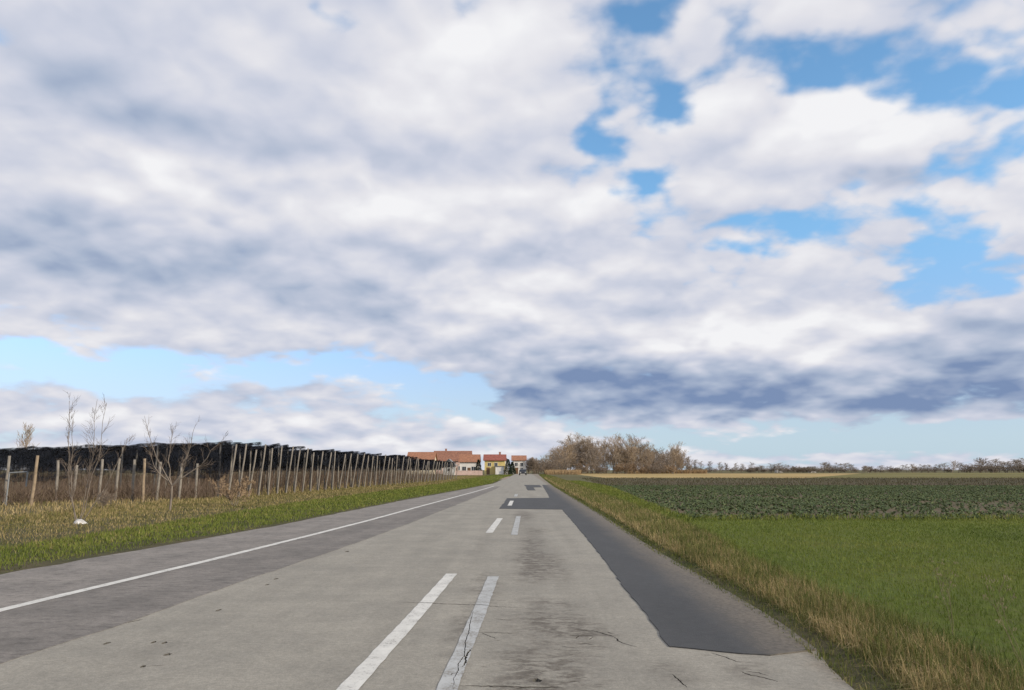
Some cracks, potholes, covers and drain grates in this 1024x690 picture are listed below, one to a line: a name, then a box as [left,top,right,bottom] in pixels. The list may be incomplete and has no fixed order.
crack [408,600,632,689]
